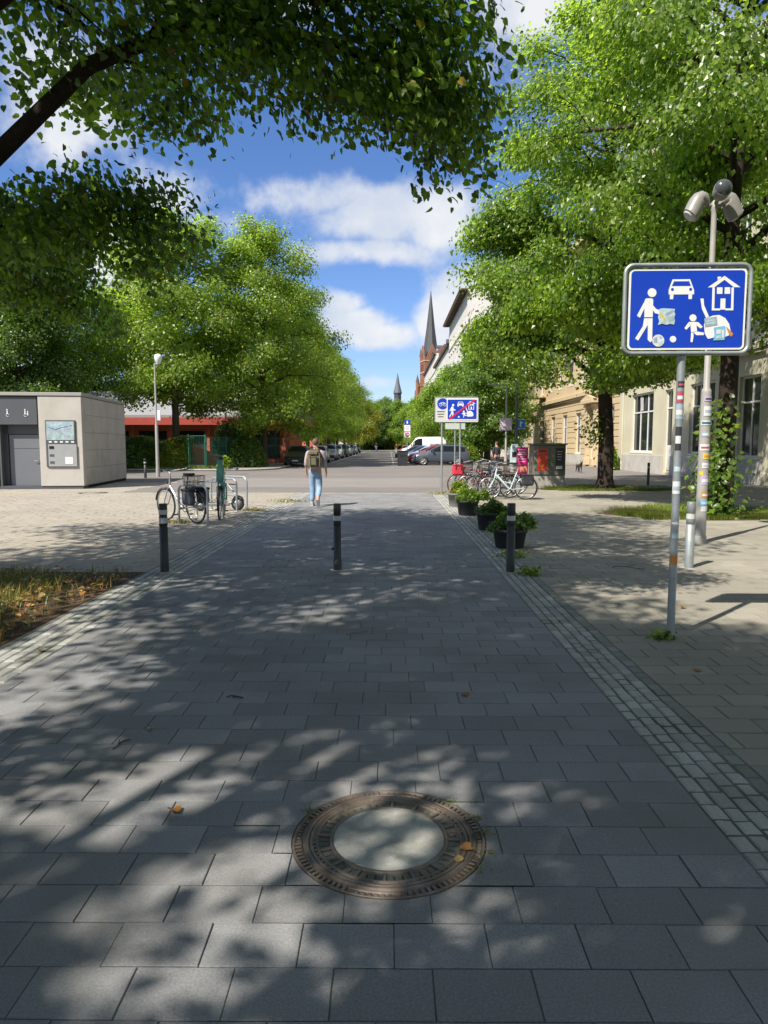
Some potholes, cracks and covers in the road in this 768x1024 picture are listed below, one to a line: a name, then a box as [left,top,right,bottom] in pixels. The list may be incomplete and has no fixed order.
manhole cover [293,790,485,900]
